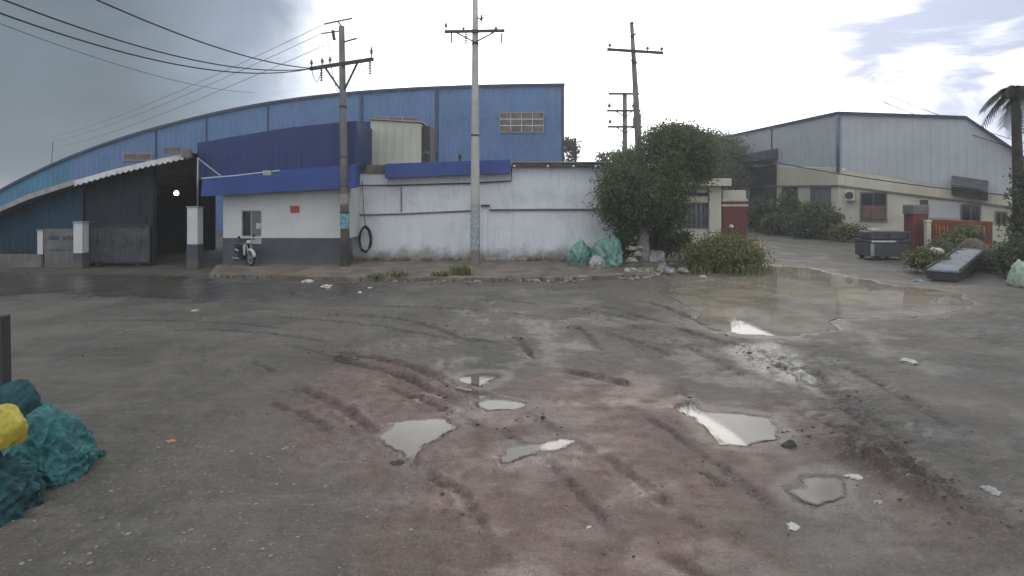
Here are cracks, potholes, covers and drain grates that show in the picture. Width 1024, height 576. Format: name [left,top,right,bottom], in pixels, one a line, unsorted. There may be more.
pothole [780,469,858,513]
pothole [373,415,465,471]
pothole [440,371,508,392]
pothole [471,396,534,413]
pothole [494,435,581,467]
pothole [670,397,787,448]
